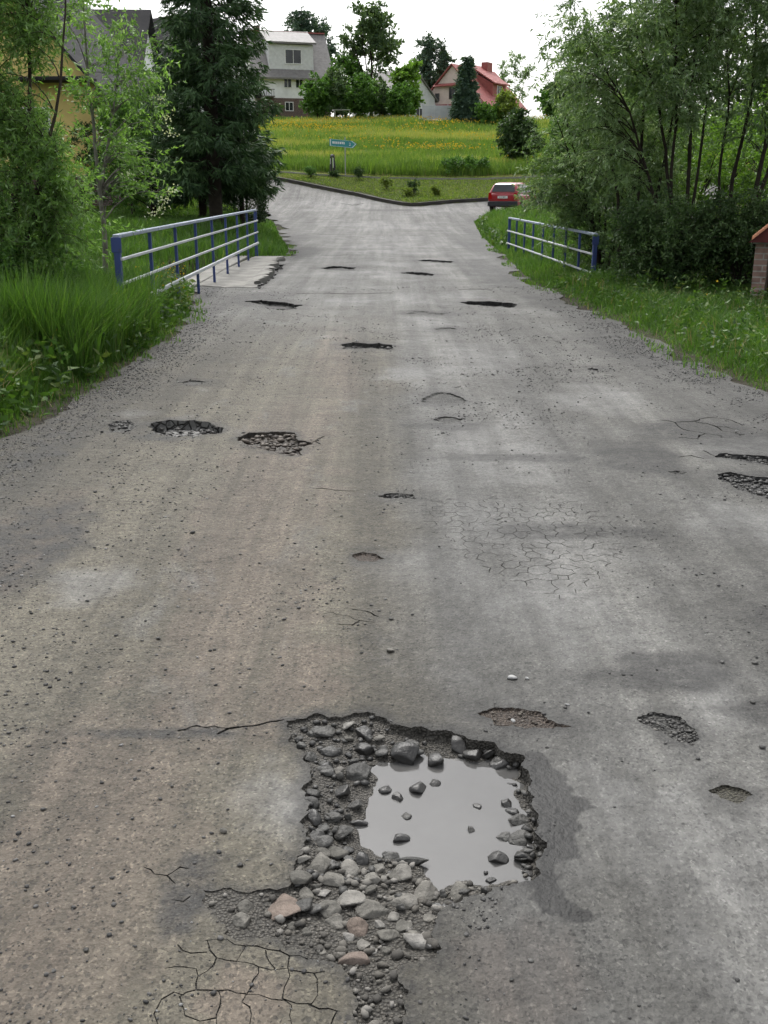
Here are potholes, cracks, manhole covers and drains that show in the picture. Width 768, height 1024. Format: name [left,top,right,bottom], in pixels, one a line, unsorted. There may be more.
pothole [637,712,699,746]
pothole [245,300,303,309]
crack [178,719,284,735]
pothole [478,707,571,729]
pothole [709,785,752,803]
pothole [107,420,136,433]
pothole [352,552,385,562]
pothole [202,712,548,1024]
pothole [237,431,312,456]
crack [405,496,627,599]
pothole [421,392,466,404]
crack [153,939,338,1024]
